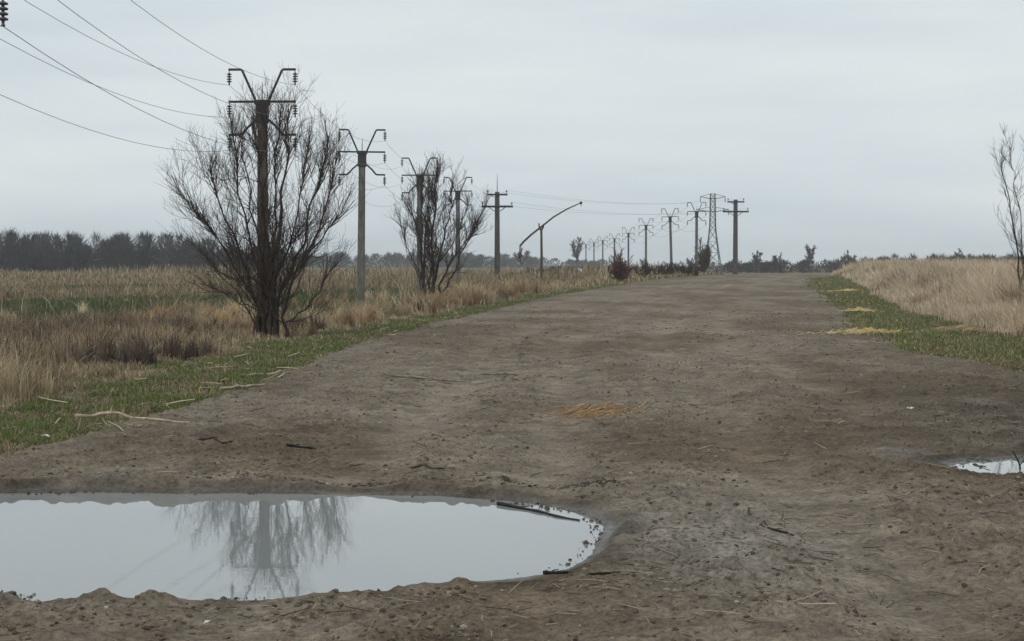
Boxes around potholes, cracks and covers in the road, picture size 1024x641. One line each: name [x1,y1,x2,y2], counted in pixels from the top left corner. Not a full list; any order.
pothole [0,470,680,618]
pothole [906,443,1024,479]
